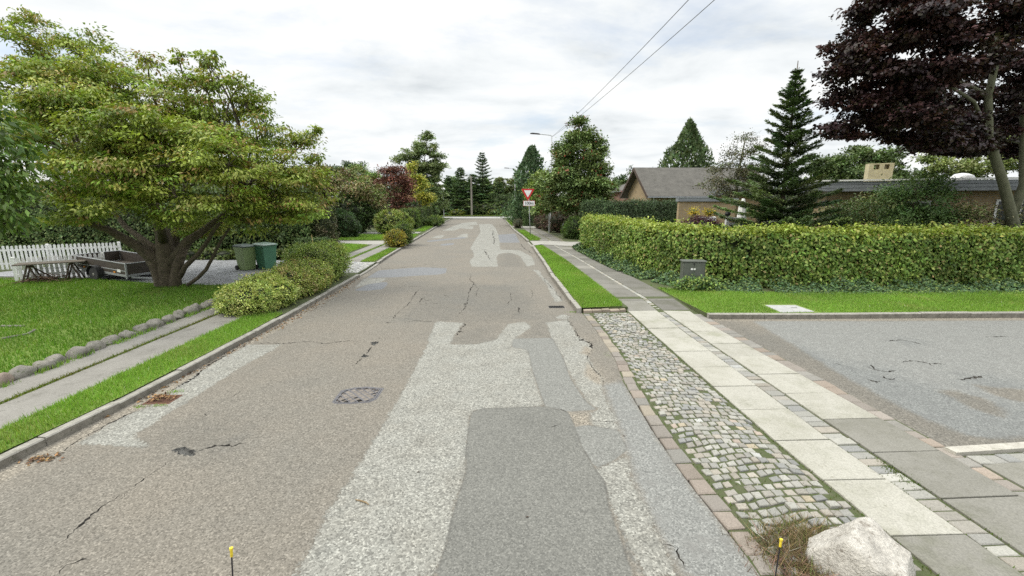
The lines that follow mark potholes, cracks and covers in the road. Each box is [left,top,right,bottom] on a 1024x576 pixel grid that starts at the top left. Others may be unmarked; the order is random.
crack [835,336,1006,383]
manhole cover [332,387,384,404]
crack [172,341,345,391]
crack [64,461,169,541]
crack [387,277,478,335]
